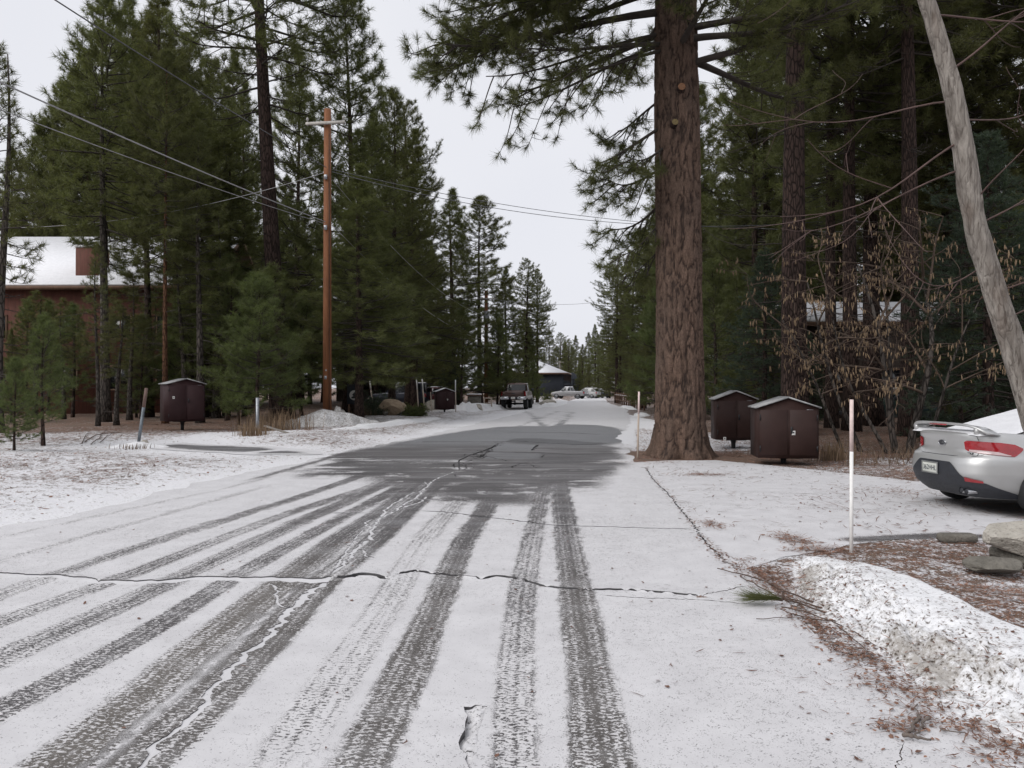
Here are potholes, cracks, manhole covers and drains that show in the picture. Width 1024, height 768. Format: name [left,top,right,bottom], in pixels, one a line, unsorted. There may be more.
pothole [458,705,487,768]
crack [0,432,752,768]
